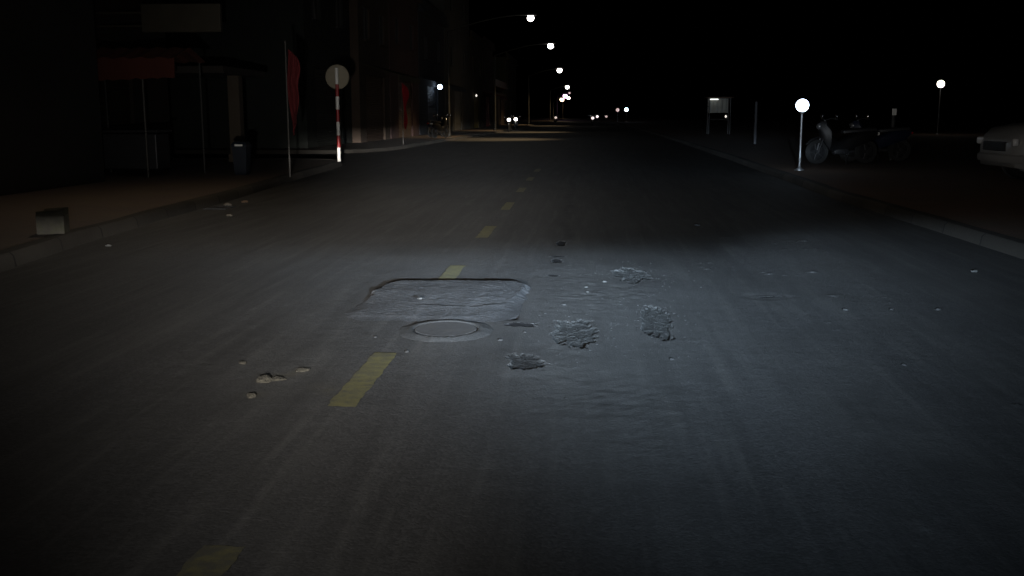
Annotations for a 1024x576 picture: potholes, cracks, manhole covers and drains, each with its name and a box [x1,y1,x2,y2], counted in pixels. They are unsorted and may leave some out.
manhole cover [398,320,493,342]
pothole [632,304,682,343]
pothole [497,351,560,373]
pothole [541,317,609,351]
pothole [607,267,658,285]
